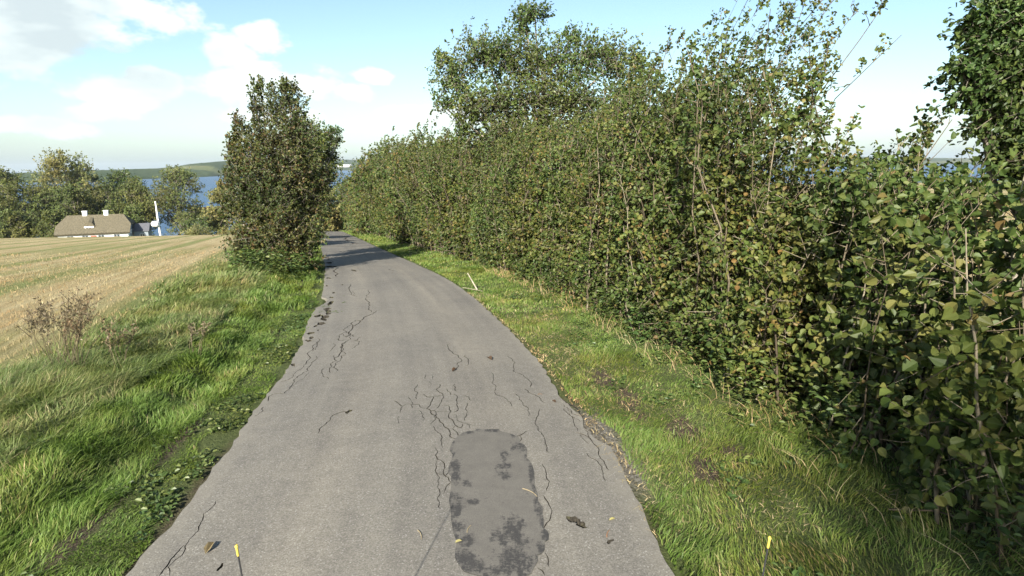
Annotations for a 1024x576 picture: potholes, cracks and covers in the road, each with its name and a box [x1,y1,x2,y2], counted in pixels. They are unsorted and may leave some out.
crack [260,260,375,413]
crack [159,501,216,576]
crack [561,398,609,481]
crack [491,357,552,528]
crack [395,345,475,507]
